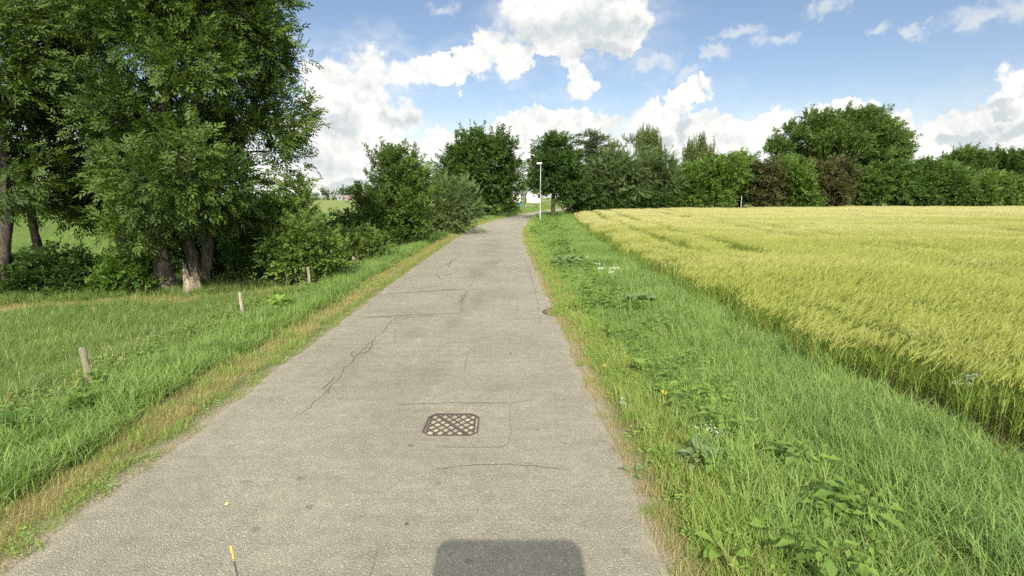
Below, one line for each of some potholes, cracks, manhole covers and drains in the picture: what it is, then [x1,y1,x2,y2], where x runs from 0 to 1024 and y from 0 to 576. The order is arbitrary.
crack [296,313,453,416]
